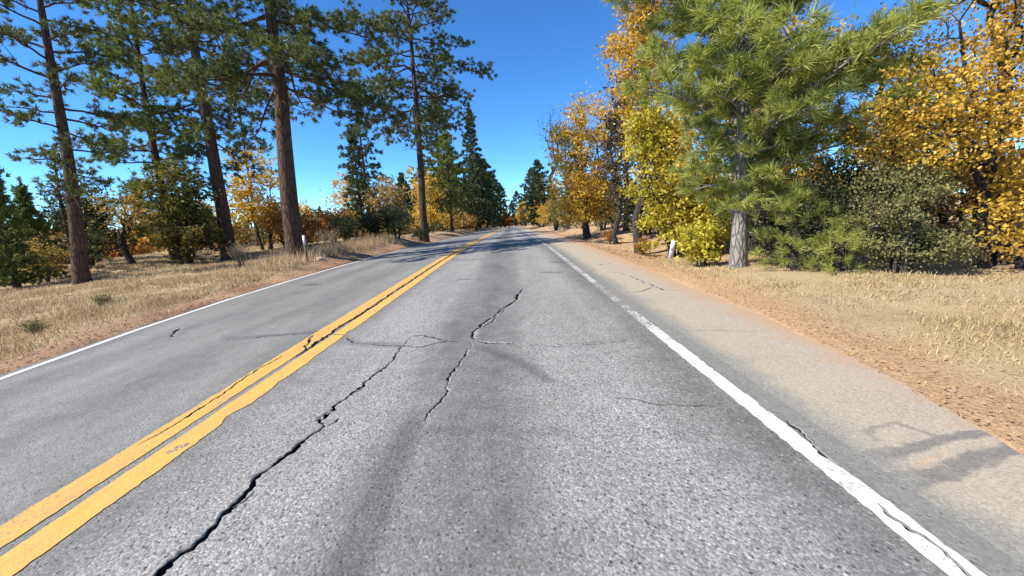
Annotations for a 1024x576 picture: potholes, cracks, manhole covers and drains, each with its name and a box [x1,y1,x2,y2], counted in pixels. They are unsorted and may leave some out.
crack [148,252,619,576]
crack [786,419,841,468]
crack [878,504,970,576]
crack [617,397,719,407]
crack [599,263,681,293]
